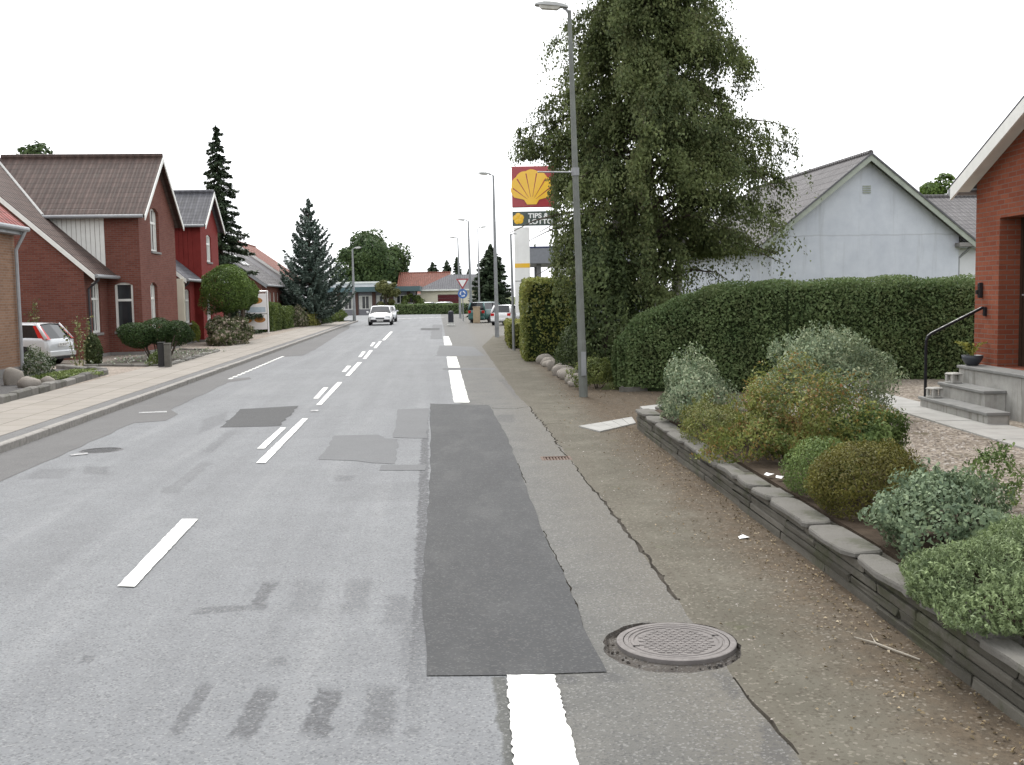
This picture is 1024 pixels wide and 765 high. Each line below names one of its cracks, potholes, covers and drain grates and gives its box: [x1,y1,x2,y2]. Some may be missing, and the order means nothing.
crack [733,677,799,755]
manhole cover [603,622,741,673]
crack [496,406,680,600]
